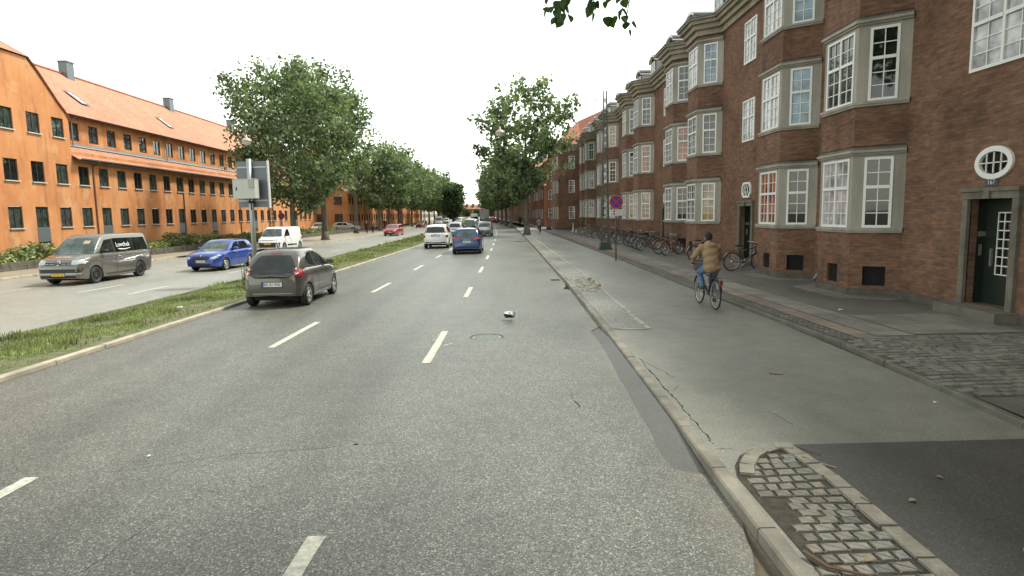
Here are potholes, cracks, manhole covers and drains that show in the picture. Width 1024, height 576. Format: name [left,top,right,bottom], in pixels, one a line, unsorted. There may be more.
crack [639,358,736,450]
